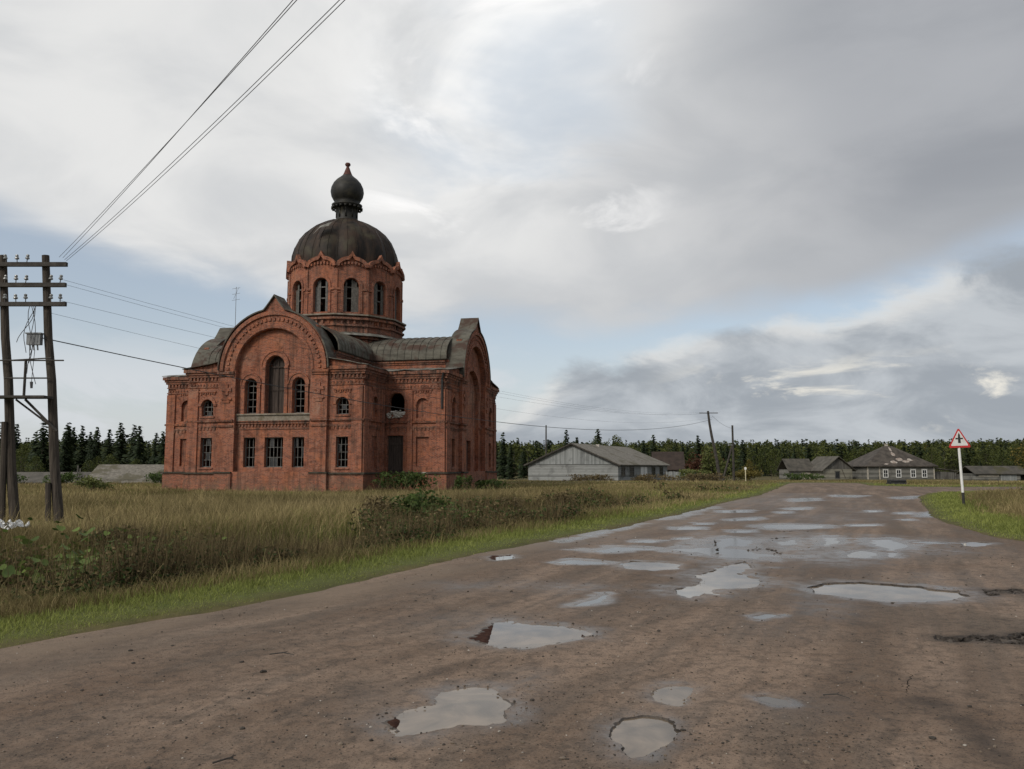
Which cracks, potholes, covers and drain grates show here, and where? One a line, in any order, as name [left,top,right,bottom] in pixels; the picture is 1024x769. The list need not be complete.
pothole [933,632,1024,645]
pothole [467,621,592,649]
pothole [807,582,970,602]
pothole [609,715,681,758]
pothole [674,561,763,598]
pothole [982,588,1024,596]
pothole [651,686,694,706]
pothole [381,687,515,737]
